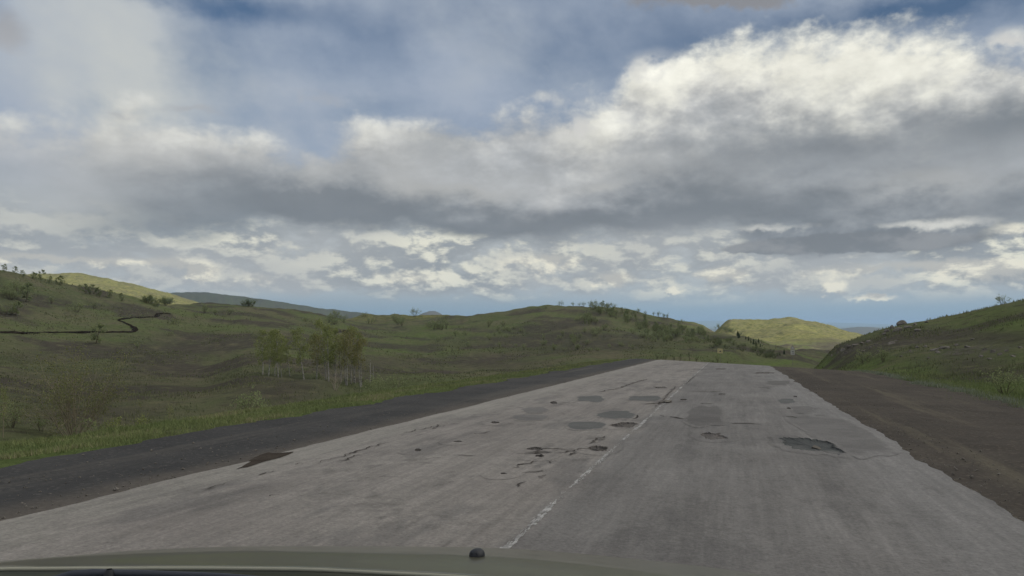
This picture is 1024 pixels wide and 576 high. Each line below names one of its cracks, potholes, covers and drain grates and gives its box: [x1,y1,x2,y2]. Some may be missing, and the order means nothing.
pothole [237,452,293,469]
crack [205,424,439,496]
pothole [767,435,853,459]
pothole [572,442,624,455]
pothole [688,429,740,443]
pothole [604,420,647,430]
pothole [517,451,560,461]
pothole [510,443,558,454]
crack [517,436,607,486]
